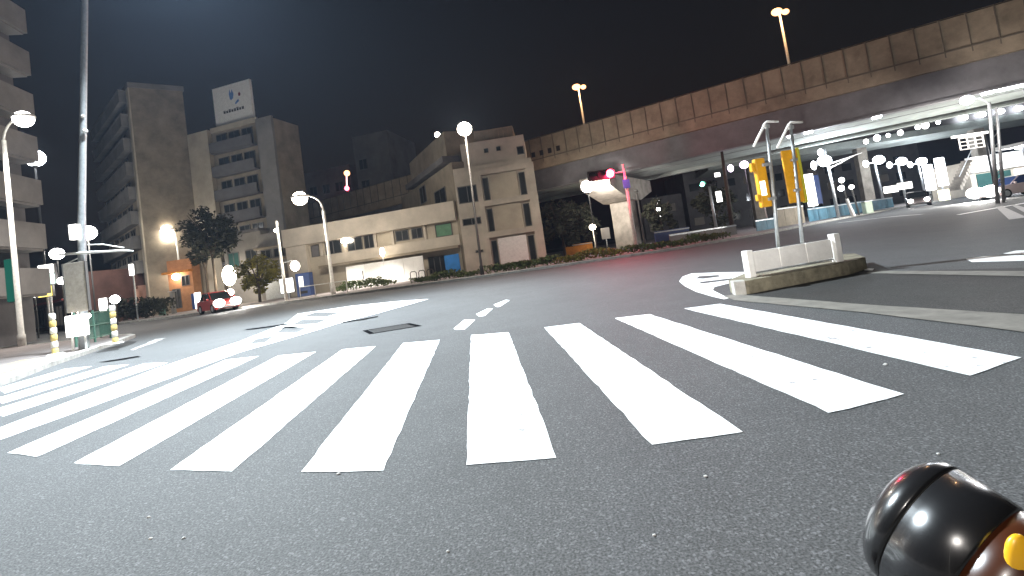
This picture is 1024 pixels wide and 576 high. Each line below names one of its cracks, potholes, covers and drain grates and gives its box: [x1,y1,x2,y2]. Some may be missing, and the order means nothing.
manhole cover [363,323,421,334]
